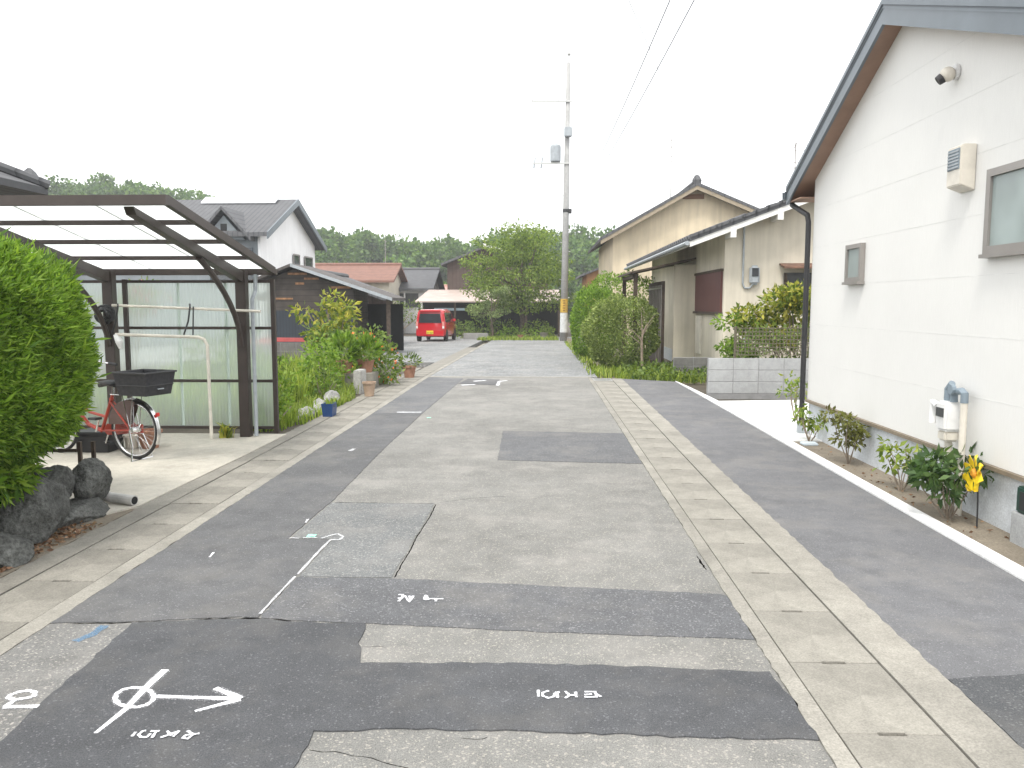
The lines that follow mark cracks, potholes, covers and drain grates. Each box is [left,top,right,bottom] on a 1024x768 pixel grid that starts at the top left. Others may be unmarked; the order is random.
crack [311,750,406,768]
